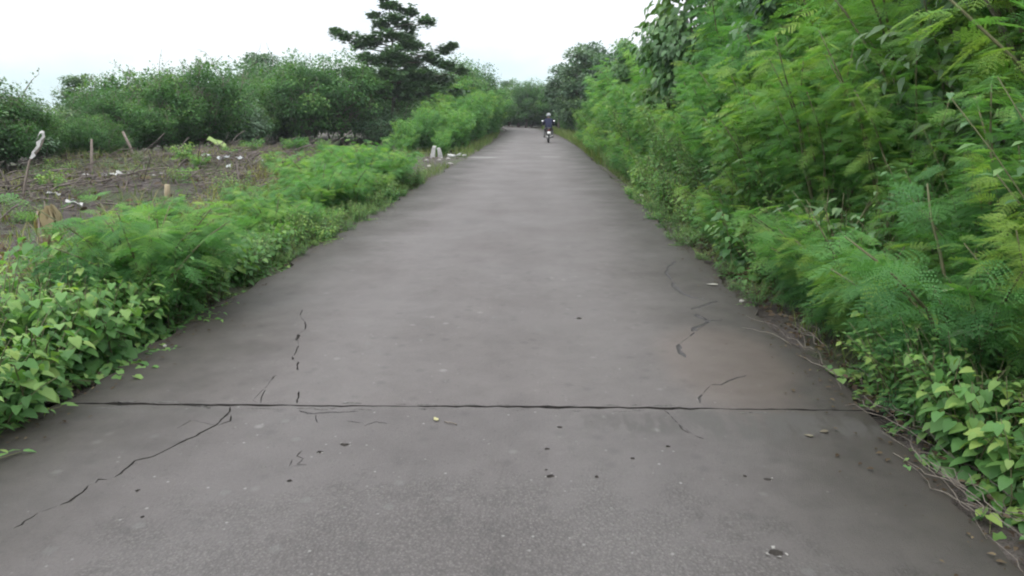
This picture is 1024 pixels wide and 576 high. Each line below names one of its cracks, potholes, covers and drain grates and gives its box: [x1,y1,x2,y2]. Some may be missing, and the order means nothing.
crack [292,311,387,425]
crack [14,407,232,528]
crack [698,375,746,403]
